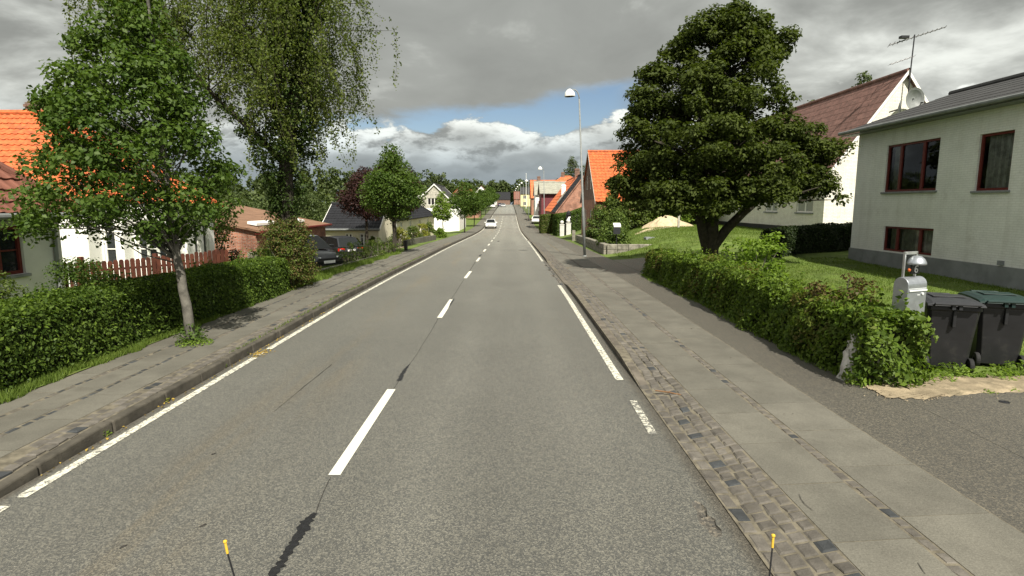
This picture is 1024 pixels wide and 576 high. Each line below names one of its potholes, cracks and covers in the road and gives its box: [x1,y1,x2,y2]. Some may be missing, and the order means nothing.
crack [268,477,331,576]
crack [394,364,410,388]
